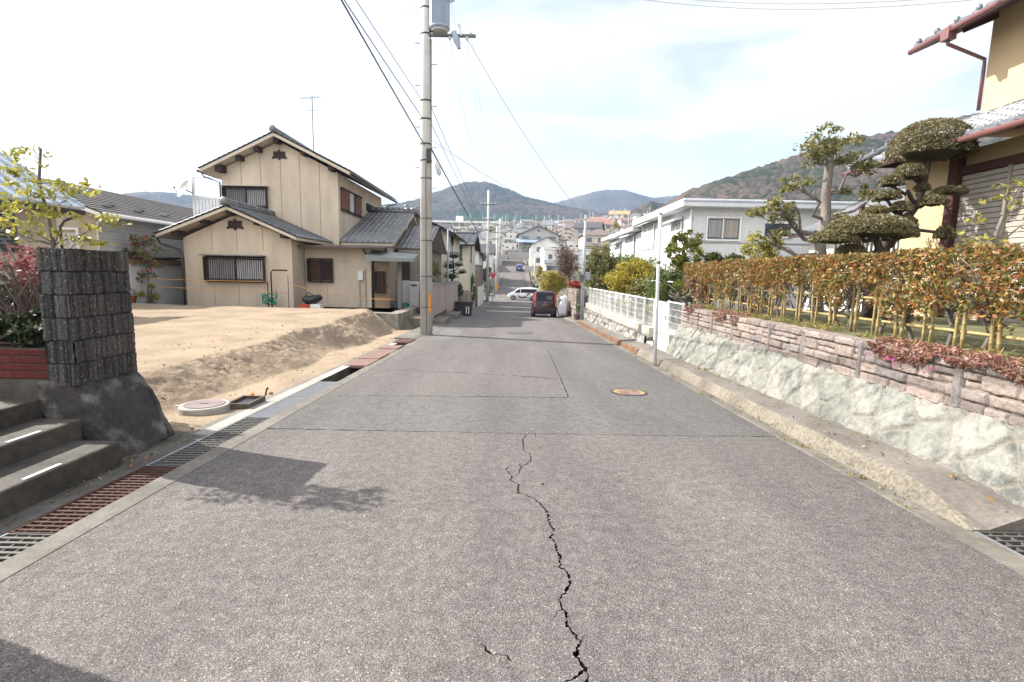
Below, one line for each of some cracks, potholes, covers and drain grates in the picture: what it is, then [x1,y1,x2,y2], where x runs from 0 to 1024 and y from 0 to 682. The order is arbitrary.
drain grate [7,466,178,534]
drain grate [974,531,1024,558]
crack [506,433,589,682]
manhole cover [178,399,231,416]
drain grate [145,438,232,467]
manhole cover [610,388,648,396]
drain grate [203,417,269,438]
